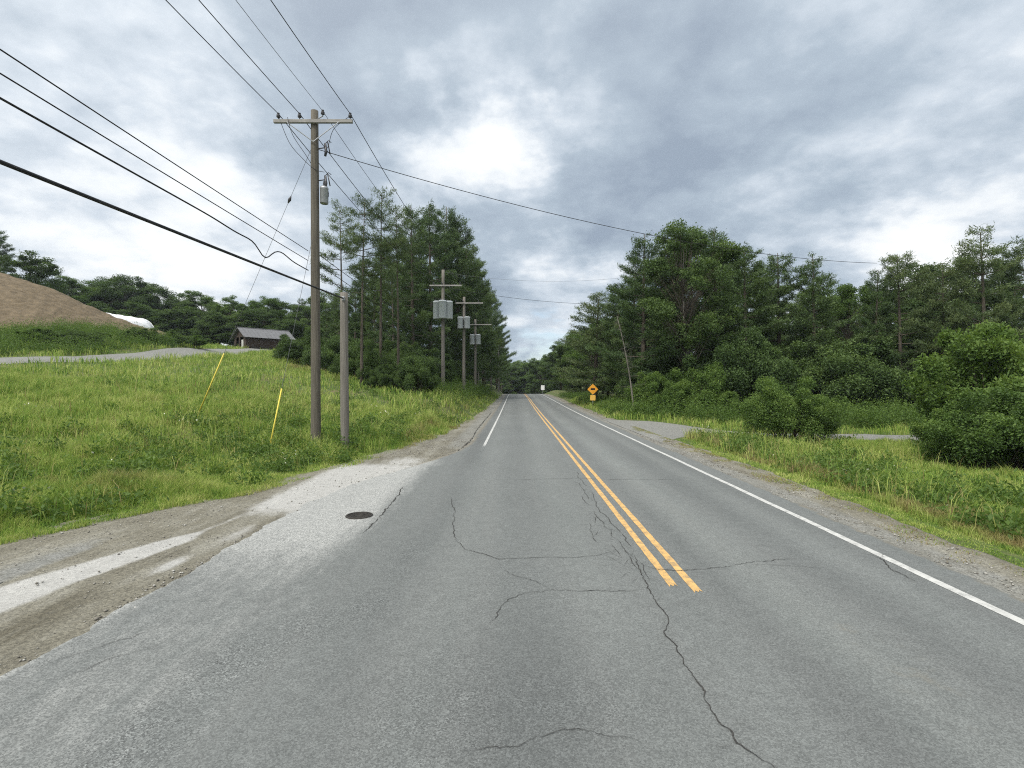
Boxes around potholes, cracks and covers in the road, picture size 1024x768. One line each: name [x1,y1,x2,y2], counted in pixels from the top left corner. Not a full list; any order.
crack [490,472,794,768]
crack [458,728,632,752]
